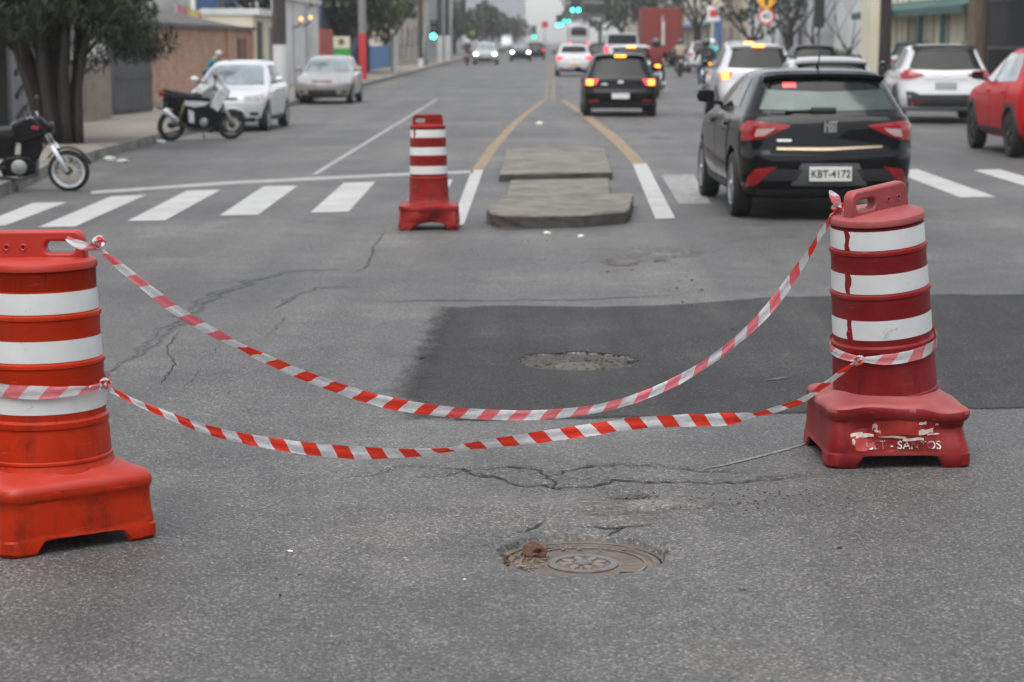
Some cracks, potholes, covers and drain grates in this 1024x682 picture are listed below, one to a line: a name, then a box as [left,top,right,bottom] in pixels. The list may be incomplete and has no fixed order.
manhole cover [503,541,664,577]
crack [362,459,802,494]
crack [355,233,383,272]
crack [161,333,221,398]
manhole cover [521,354,636,371]
crack [589,525,640,536]
